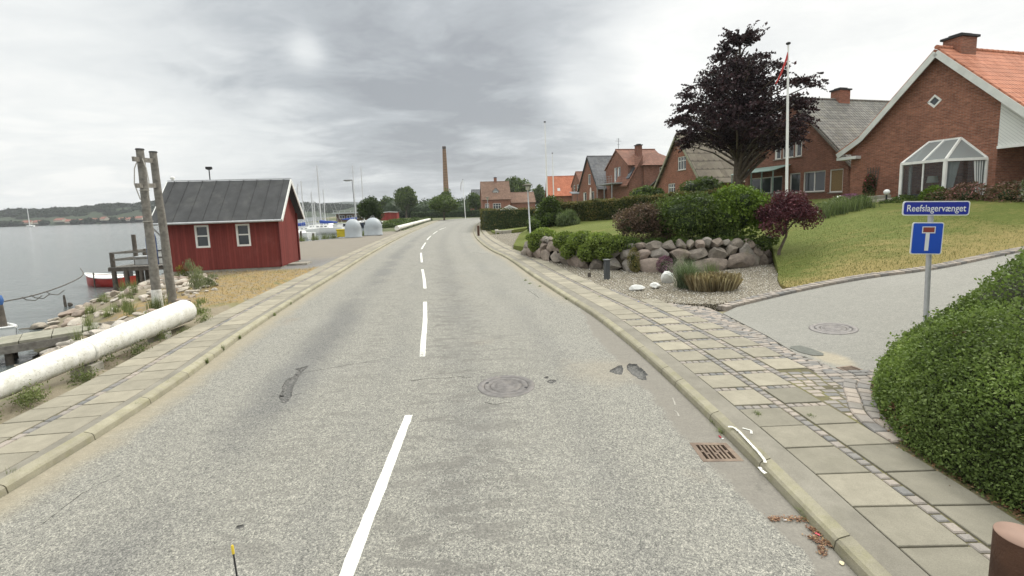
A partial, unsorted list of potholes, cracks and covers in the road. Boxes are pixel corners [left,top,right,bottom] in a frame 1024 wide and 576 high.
drain grate [690,443,744,462]
pothole [627,363,648,380]
pothole [279,366,308,403]
manhole cover [808,323,859,335]
manhole cover [477,375,535,398]
